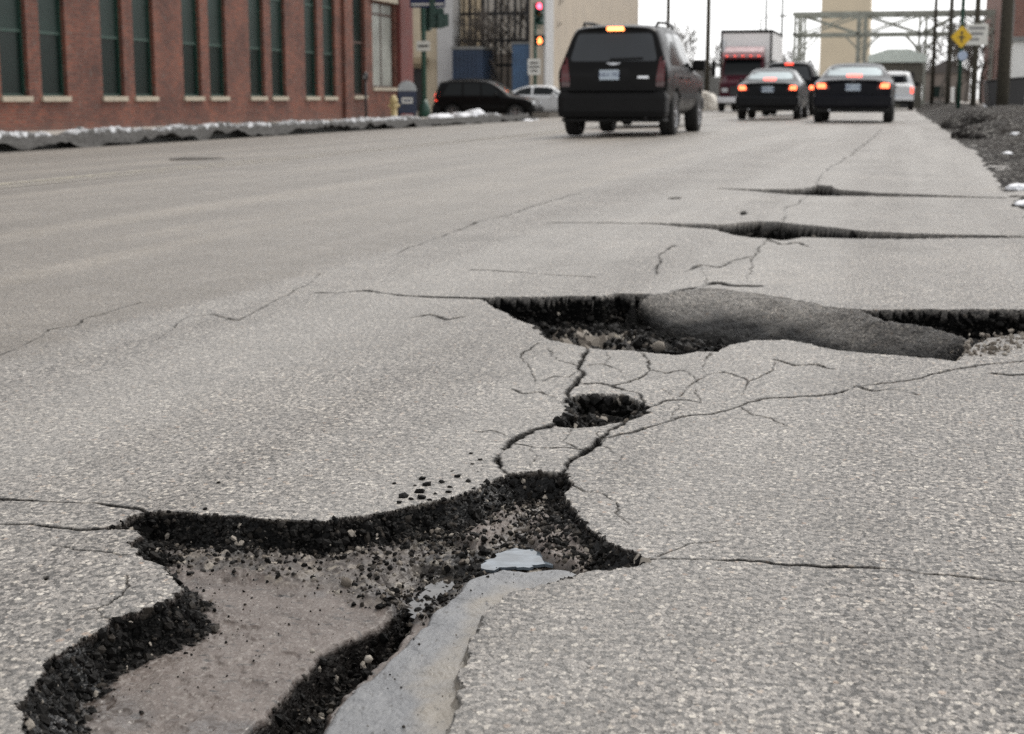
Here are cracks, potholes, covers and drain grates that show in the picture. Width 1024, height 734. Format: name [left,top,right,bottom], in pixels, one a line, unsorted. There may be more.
crack [0,497,149,556]
pothole [560,393,651,428]
pothole [635,221,1024,240]
crack [650,540,1024,582]
crack [829,128,883,168]
pothole [16,471,643,734]
pothole [485,288,1024,361]
crack [477,342,1024,525]
